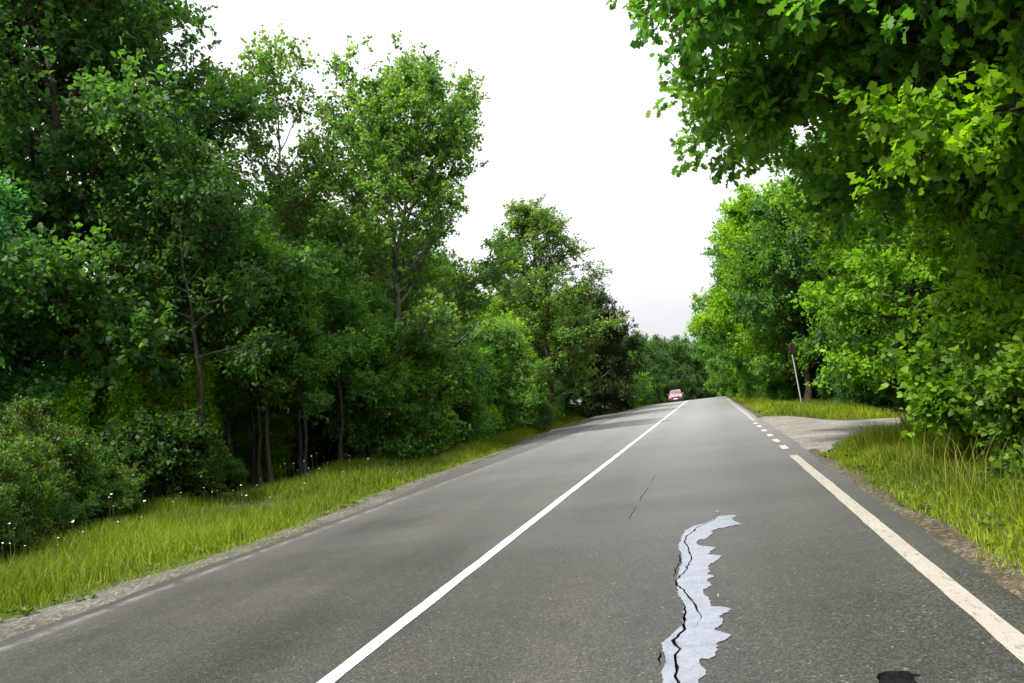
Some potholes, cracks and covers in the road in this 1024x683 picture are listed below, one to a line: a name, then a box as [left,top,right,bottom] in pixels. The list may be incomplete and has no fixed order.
crack [657,511,742,683]
pothole [876,671,921,683]
